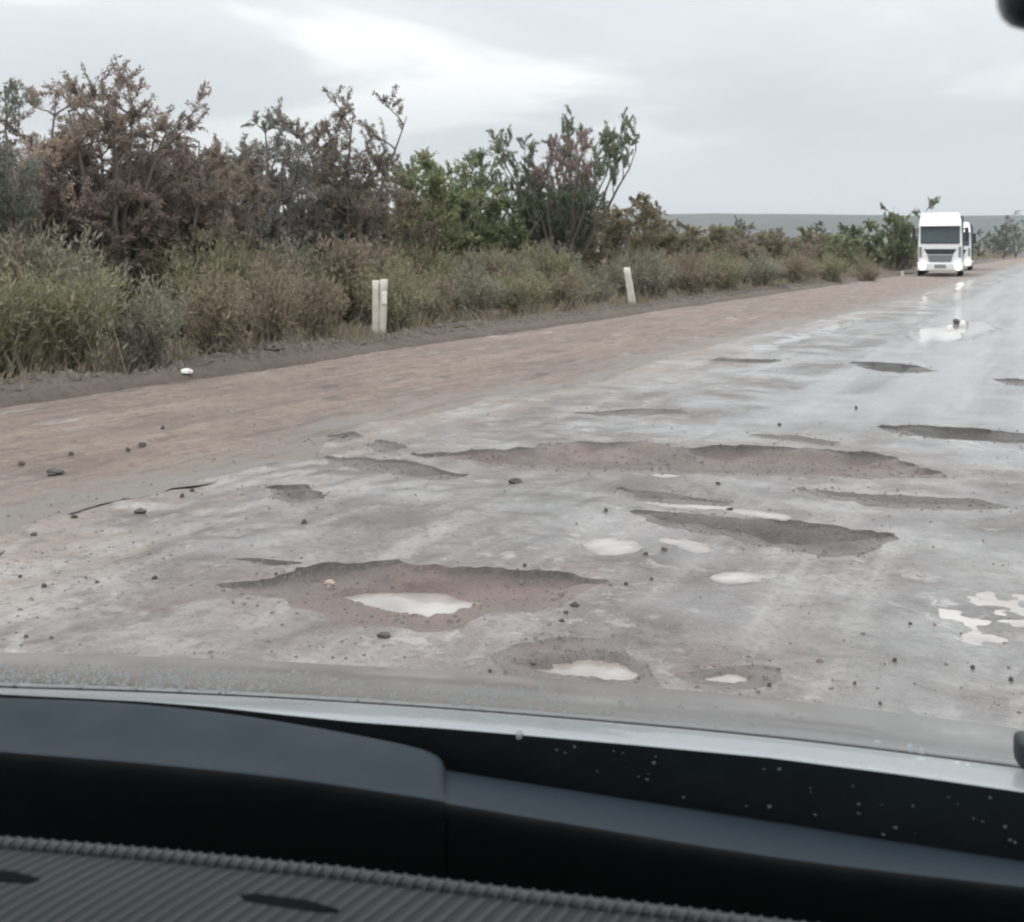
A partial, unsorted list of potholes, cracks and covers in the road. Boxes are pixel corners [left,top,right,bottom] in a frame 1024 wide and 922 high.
pothole [850,362,936,373]
pothole [264,484,325,503]
pothole [689,664,782,689]
pothole [797,487,1010,511]
pothole [877,425,1024,444]
pothole [994,378,1024,386]
pothole [630,510,900,557]
pothole [215,559,609,632]
pothole [410,441,945,479]
pothole [616,487,730,506]
pothole [322,456,468,480]
pothole [489,636,658,685]
